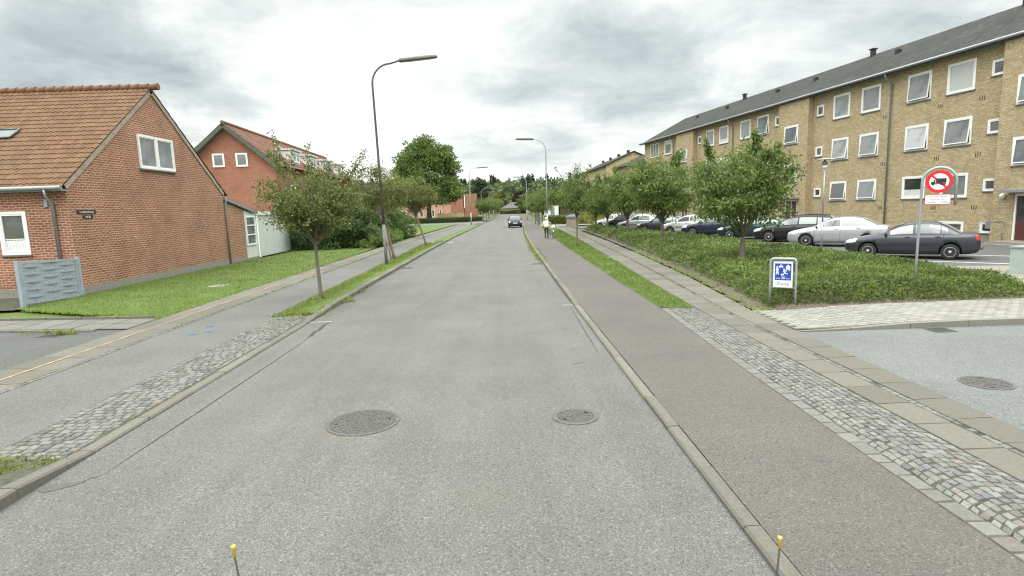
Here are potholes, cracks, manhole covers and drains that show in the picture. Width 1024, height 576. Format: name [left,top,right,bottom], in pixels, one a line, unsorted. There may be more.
manhole cover [957,376,1017,390]
manhole cover [552,408,599,425]
manhole cover [325,409,400,436]
